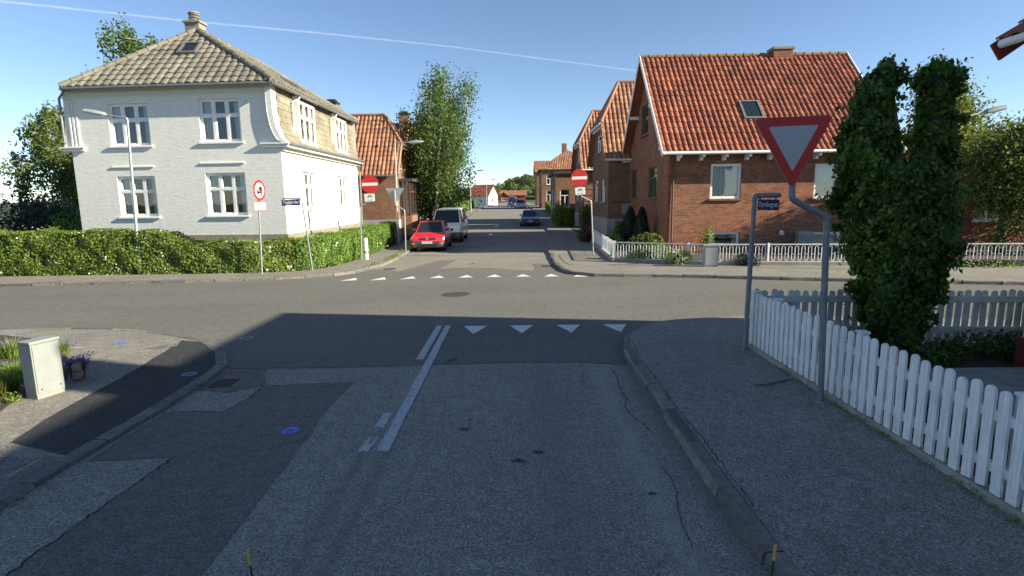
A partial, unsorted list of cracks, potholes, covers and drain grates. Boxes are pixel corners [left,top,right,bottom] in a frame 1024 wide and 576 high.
crack [661,467,693,550]
crack [631,340,753,505]
drain grate [207,379,240,388]
